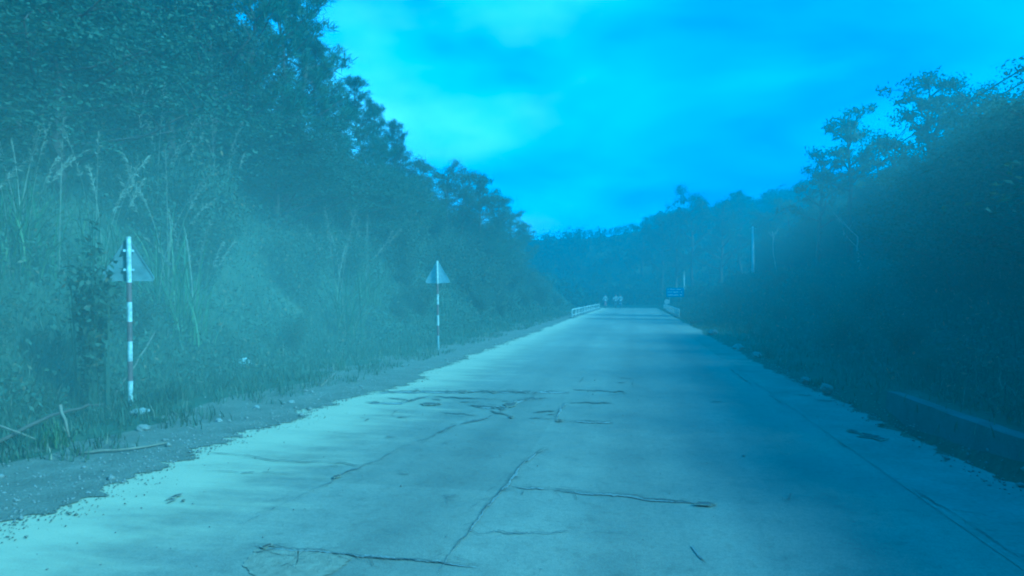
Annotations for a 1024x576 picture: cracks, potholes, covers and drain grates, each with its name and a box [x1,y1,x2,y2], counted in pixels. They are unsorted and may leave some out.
crack [250,543,481,568]
crack [210,377,634,523]
crack [445,451,700,507]
